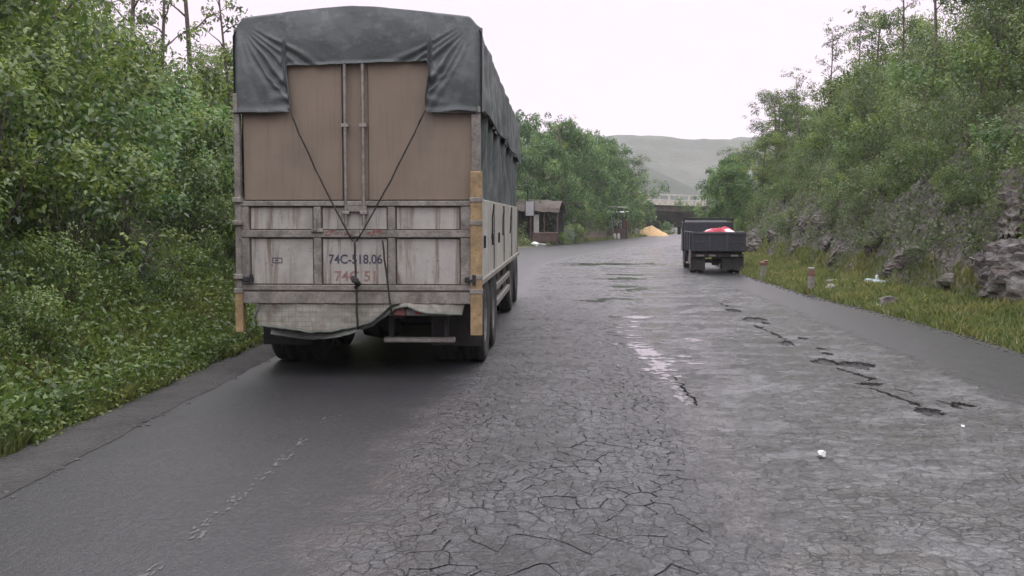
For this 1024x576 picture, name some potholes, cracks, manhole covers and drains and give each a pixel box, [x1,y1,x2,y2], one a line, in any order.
crack [405,309,709,576]
pothole [835,361,875,370]
crack [753,325,786,340]
pothole [913,407,947,416]
pothole [810,358,841,366]
crack [836,367,962,409]
